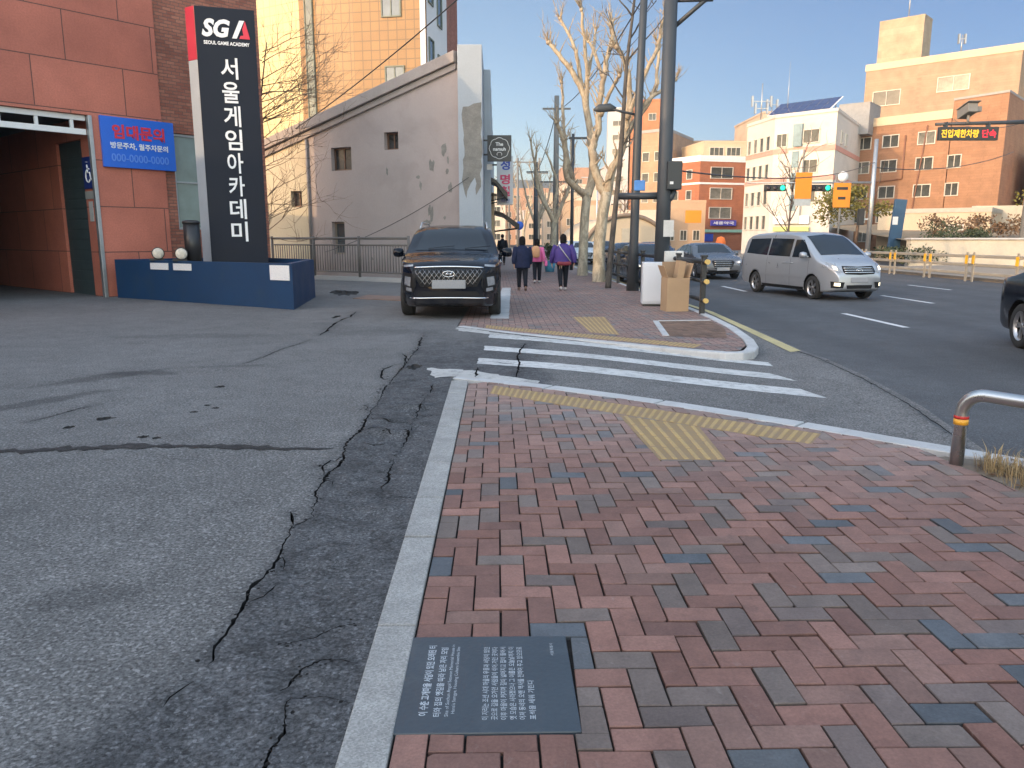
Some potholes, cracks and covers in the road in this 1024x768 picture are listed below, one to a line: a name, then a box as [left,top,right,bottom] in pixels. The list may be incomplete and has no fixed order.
crack [163,336,433,768]
crack [247,313,355,363]
crack [504,344,526,378]
